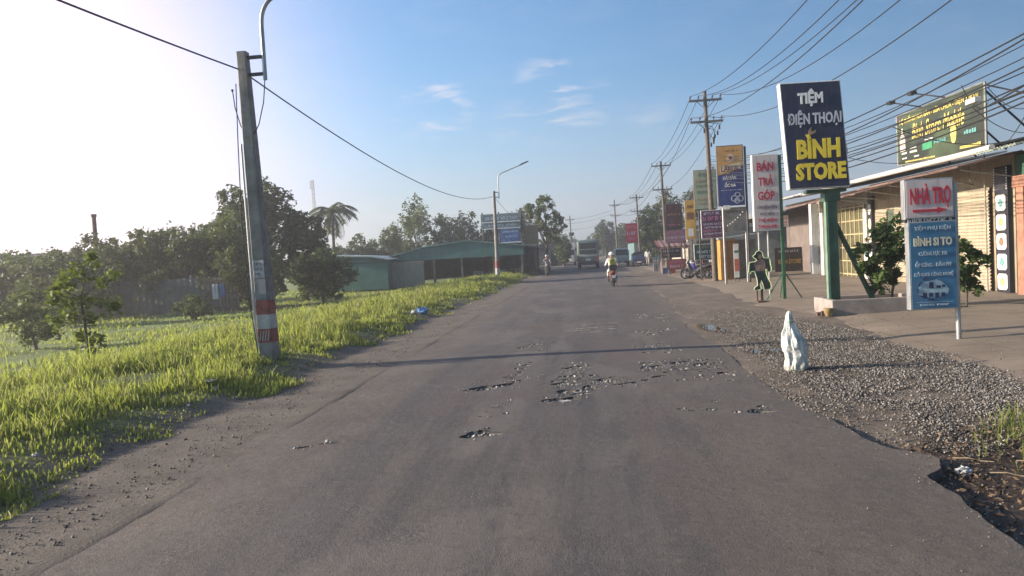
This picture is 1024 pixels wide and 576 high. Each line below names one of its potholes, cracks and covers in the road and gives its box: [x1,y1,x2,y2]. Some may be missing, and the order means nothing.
pothole [638,358,738,381]
pothole [525,361,633,405]
pothole [460,362,535,393]
pothole [732,405,778,414]
pothole [457,427,502,440]
